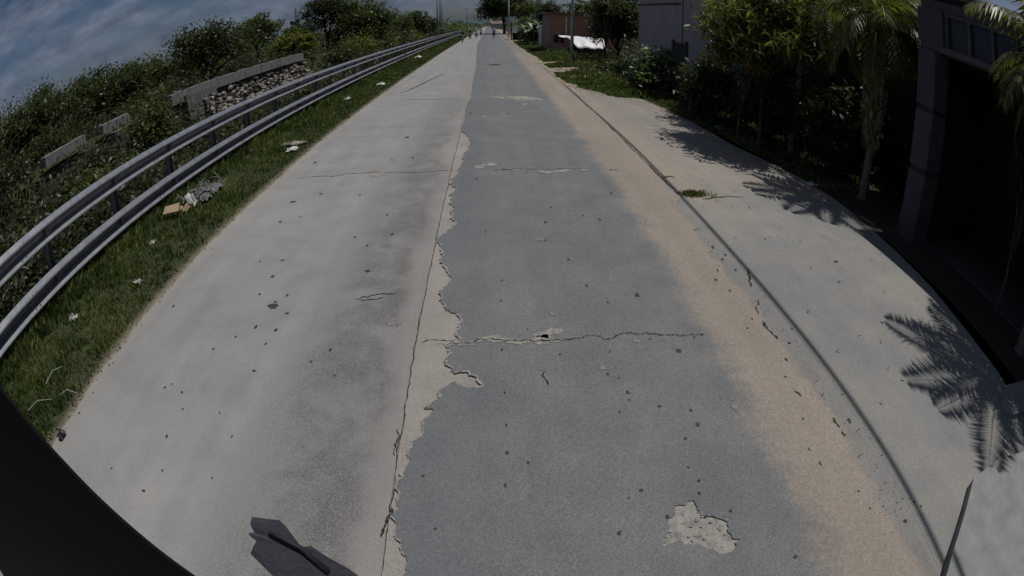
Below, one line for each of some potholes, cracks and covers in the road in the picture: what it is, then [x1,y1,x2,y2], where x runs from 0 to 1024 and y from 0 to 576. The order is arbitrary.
crack [747,269,778,339]
pothole [662,501,739,554]
crack [380,507,394,538]
crack [424,332,698,347]
